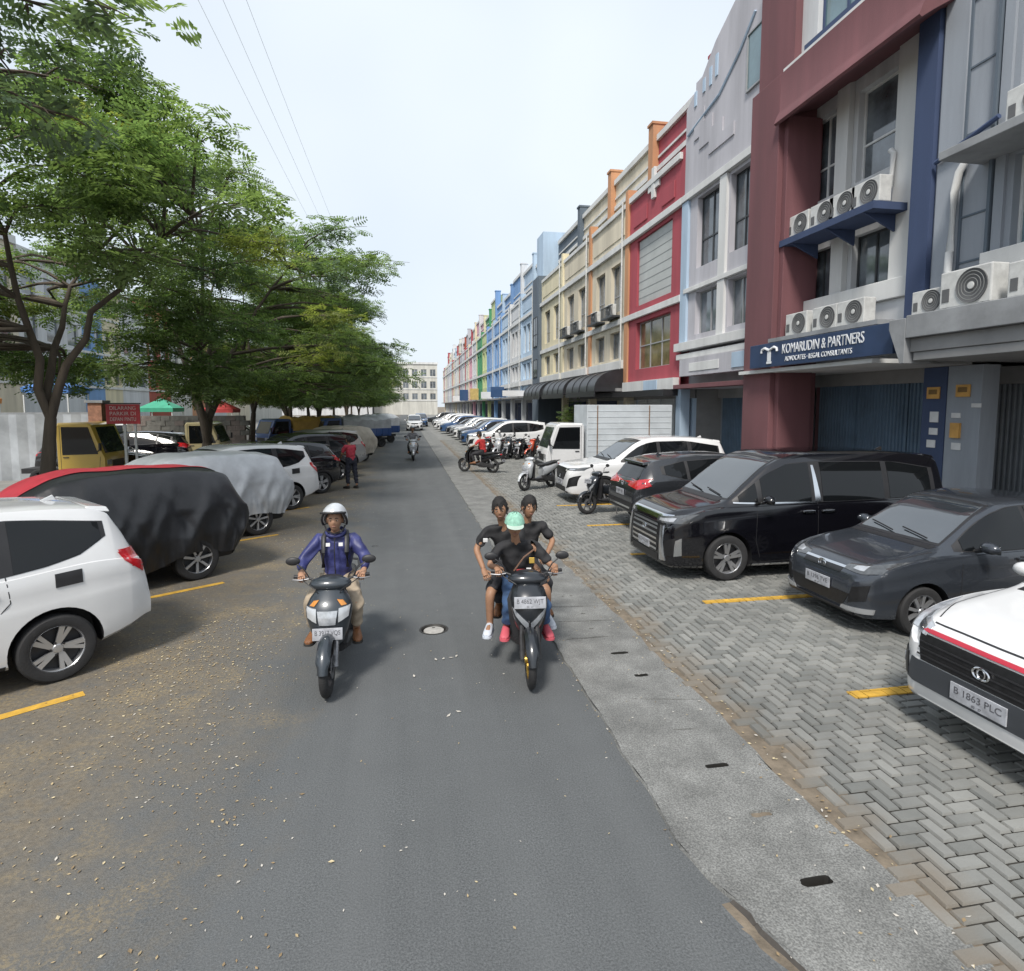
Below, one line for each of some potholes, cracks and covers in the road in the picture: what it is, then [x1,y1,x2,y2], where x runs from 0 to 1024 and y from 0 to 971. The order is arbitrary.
manhole cover [419,624,448,635]
